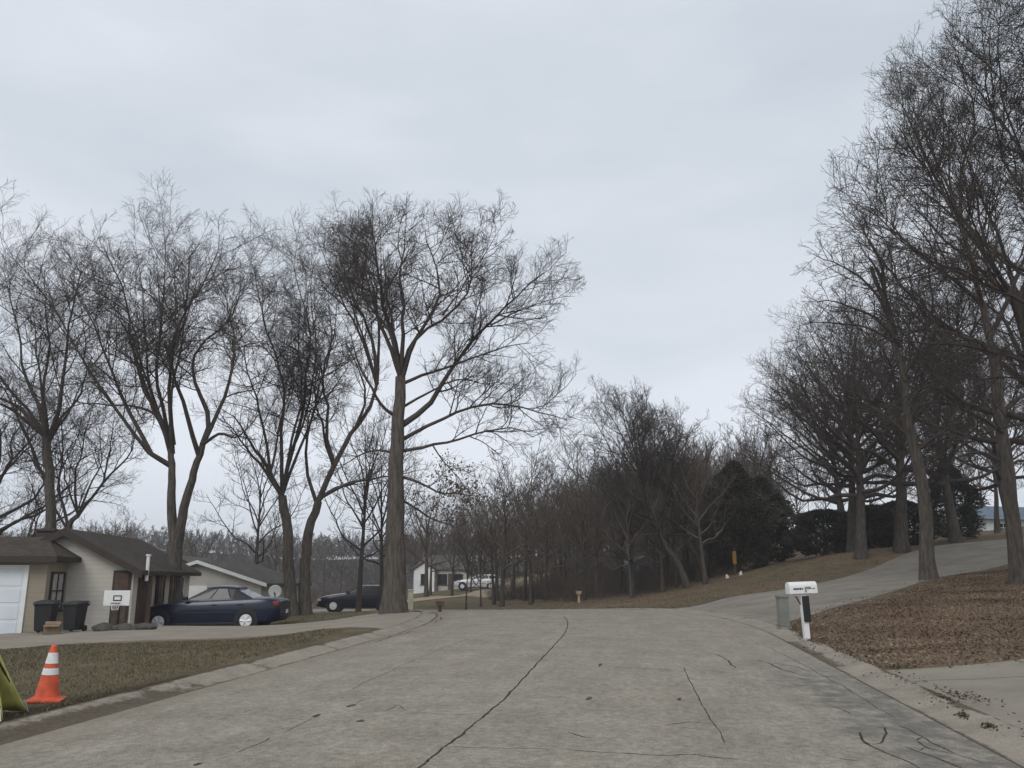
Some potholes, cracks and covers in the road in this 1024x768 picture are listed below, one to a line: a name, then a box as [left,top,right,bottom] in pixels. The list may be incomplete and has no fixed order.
crack [758,648,984,768]
crack [357,617,741,768]
